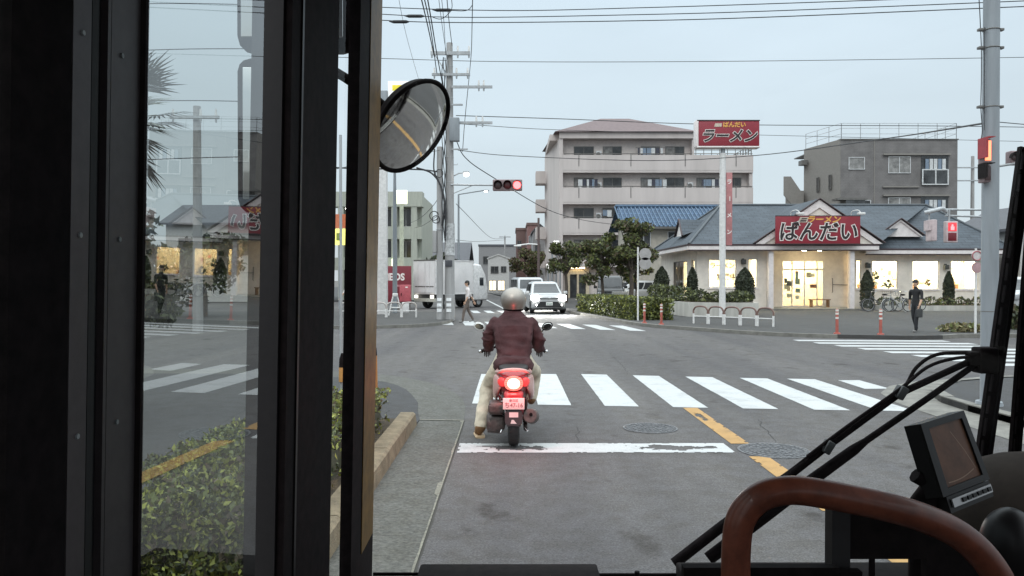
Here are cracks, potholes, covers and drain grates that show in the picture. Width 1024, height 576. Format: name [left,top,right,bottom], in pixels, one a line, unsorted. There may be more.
manhole cover [623,423,678,433]
manhole cover [737,443,811,459]
